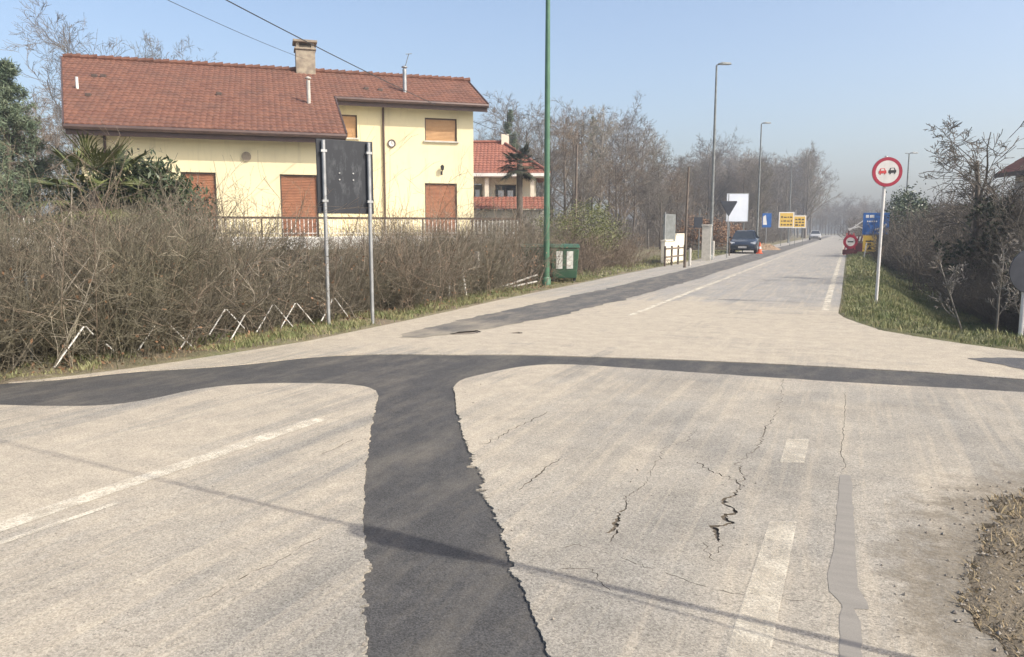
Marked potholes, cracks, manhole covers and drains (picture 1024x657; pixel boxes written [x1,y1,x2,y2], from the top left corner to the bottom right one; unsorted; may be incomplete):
crack [563,392,869,657]
